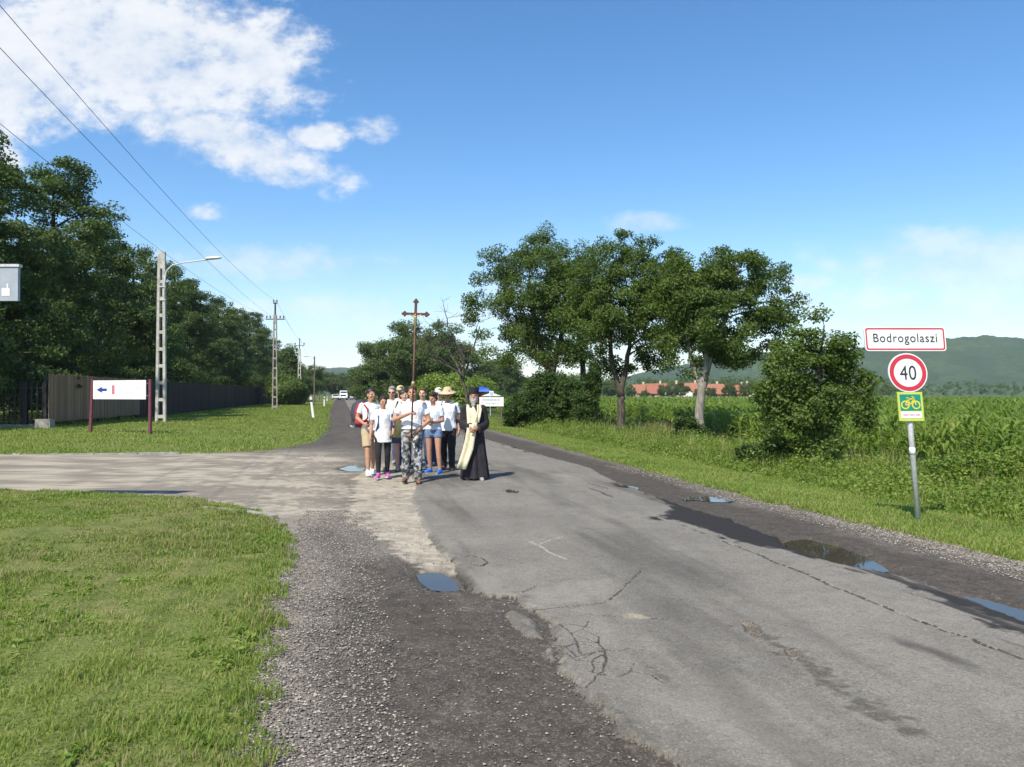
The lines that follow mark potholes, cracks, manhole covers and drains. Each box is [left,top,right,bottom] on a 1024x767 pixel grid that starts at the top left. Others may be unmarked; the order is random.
pothole [416,573,461,592]
crack [527,536,567,559]
crack [522,571,672,689]
crack [718,539,1024,660]
